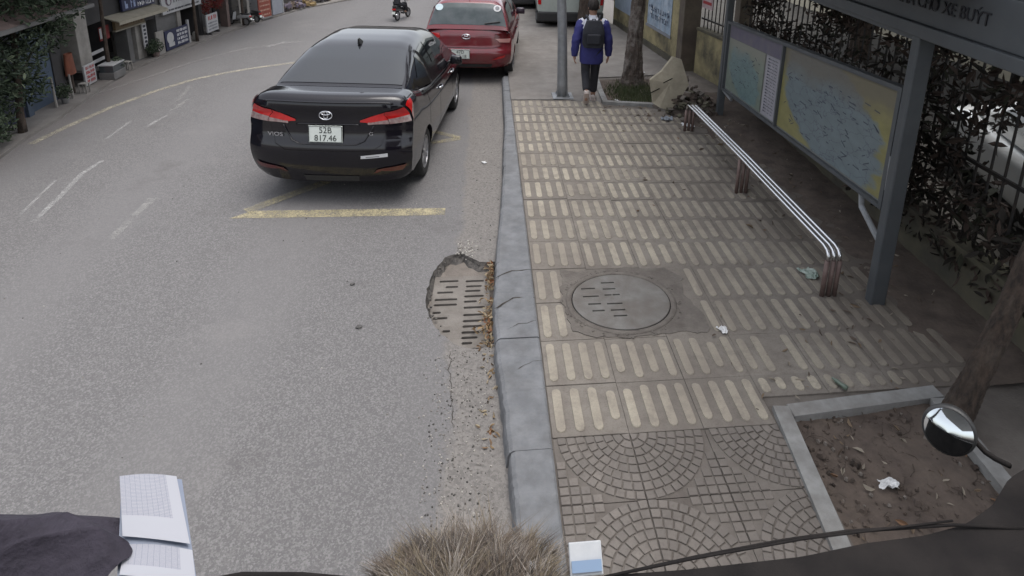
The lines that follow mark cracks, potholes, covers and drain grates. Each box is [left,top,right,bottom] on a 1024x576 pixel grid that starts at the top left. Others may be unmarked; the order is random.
manhole cover [565,272,677,335]
drain grate [430,275,490,349]
